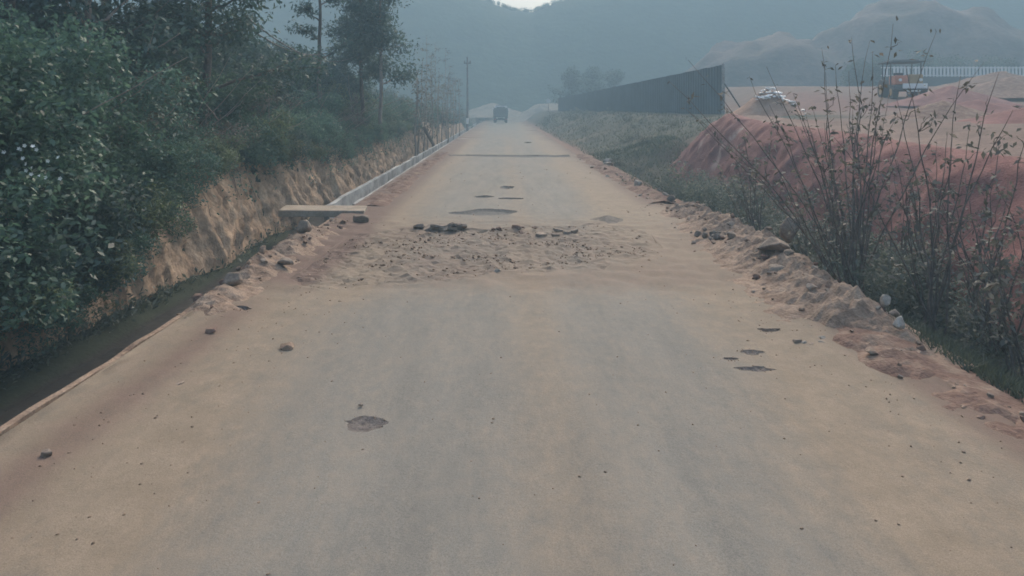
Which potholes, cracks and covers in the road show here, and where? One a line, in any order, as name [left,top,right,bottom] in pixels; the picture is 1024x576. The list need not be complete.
pothole [345,416,389,432]
pothole [290,223,663,290]
